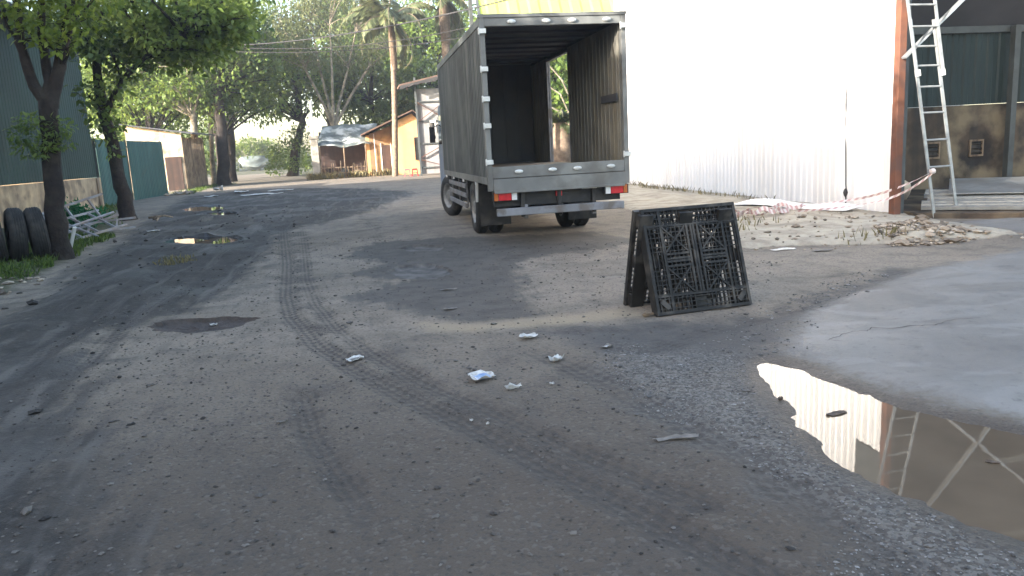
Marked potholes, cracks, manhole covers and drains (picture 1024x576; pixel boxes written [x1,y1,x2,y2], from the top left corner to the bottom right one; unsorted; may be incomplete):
pothole [164,233,244,244]
pothole [147,316,260,334]
